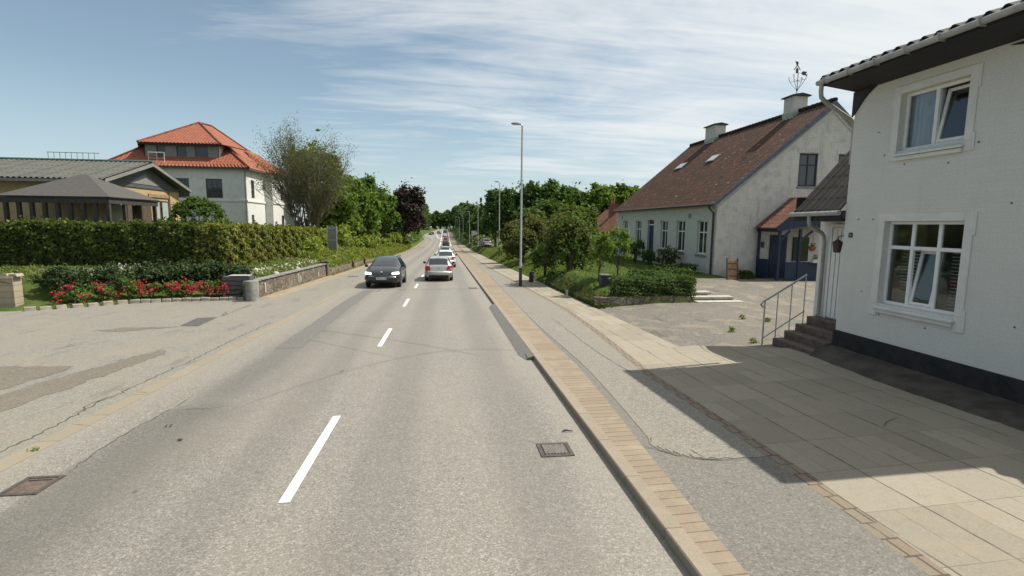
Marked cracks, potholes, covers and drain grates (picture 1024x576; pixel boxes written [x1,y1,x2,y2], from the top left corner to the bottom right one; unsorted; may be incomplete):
crack [1,322,270,452]
